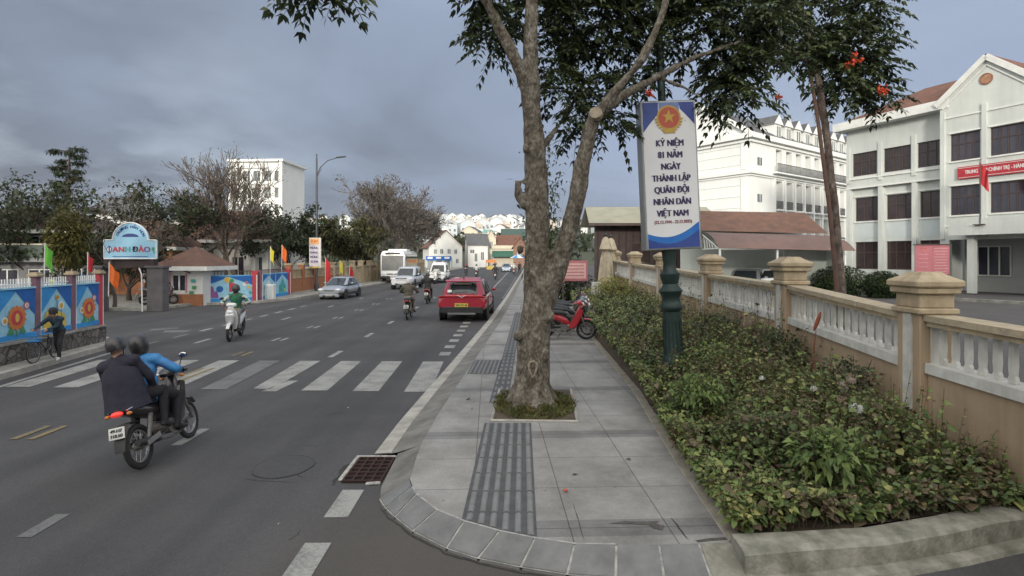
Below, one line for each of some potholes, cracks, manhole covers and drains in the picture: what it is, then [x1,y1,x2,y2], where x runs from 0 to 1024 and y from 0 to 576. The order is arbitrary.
drain grate [338,455,397,485]
manhole cover [252,455,316,479]
